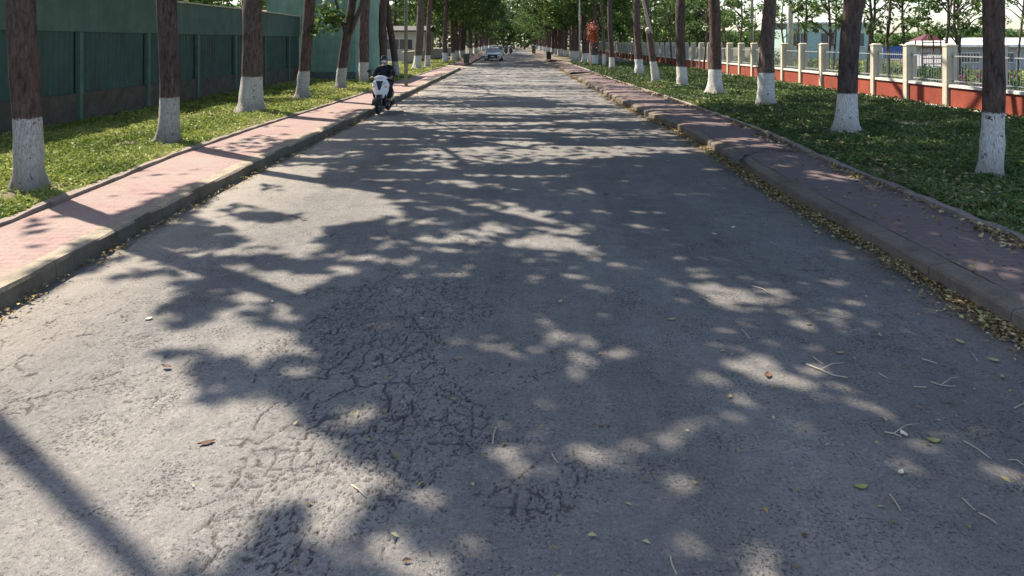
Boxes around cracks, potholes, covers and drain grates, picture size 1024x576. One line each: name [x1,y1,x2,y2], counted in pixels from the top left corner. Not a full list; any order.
crack [205,272,535,568]
crack [511,461,584,517]
crack [0,311,158,415]
